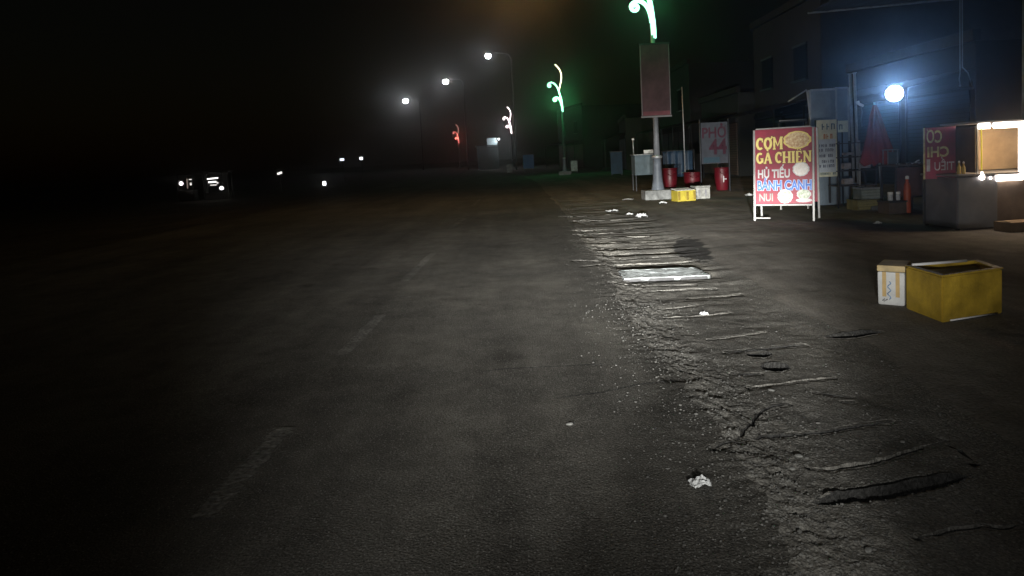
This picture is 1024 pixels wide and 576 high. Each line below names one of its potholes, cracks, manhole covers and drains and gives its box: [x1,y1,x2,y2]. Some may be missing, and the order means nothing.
pothole [744,349,773,358]
pothole [822,330,883,339]
crack [560,214,980,473]
crack [914,509,1024,541]
pothole [759,362,792,372]
